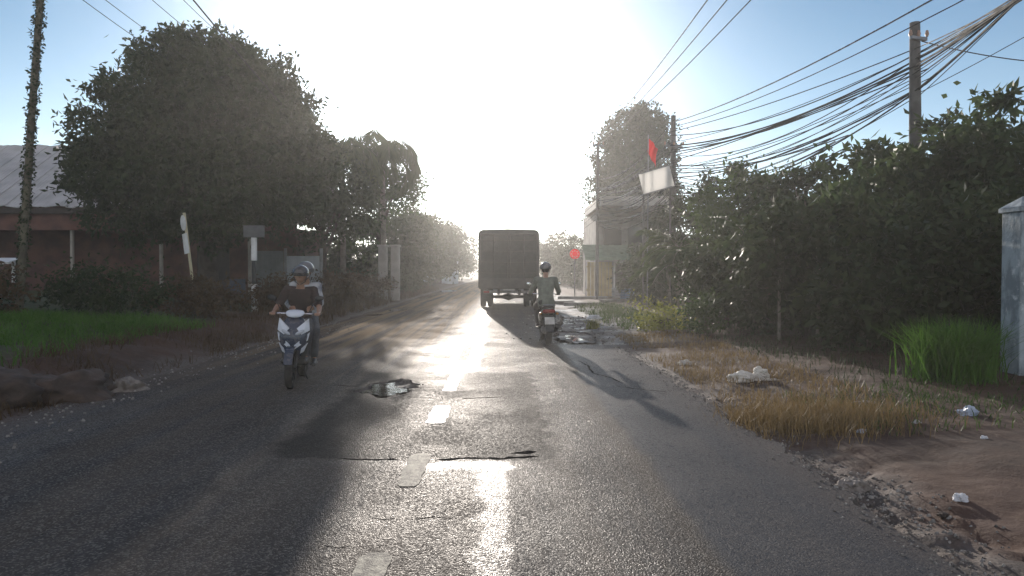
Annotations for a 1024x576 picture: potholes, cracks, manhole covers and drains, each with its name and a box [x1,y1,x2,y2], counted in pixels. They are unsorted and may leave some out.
pothole [350,378,424,398]
crack [580,361,665,392]
pothole [552,330,597,345]
crack [341,451,537,461]
